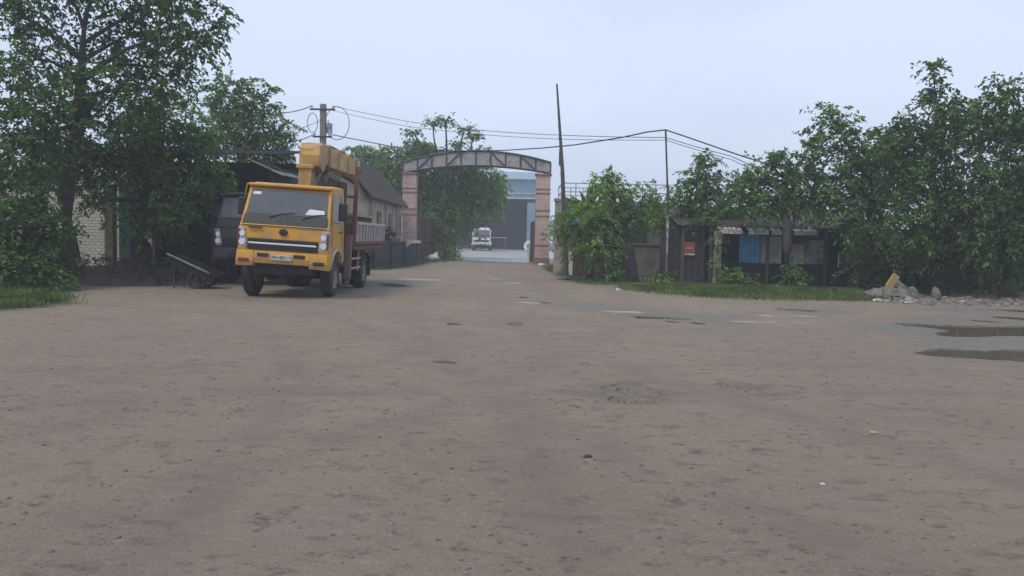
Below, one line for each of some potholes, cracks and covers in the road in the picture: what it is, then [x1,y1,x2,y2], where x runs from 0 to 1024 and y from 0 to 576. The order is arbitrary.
pothole [599,382,662,406]
pothole [894,323,1024,337]
pothole [915,348,1024,362]
pothole [715,382,762,396]
